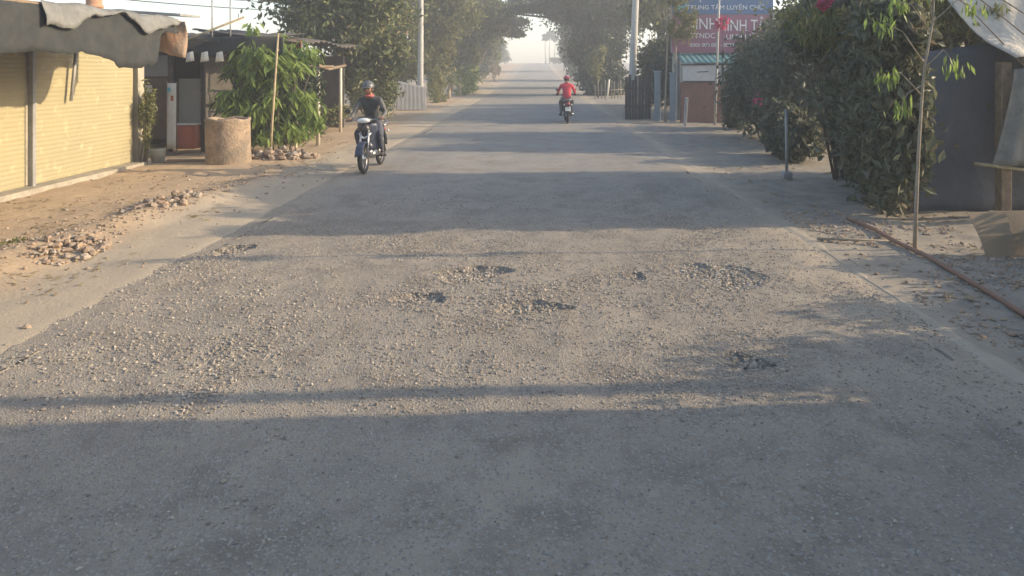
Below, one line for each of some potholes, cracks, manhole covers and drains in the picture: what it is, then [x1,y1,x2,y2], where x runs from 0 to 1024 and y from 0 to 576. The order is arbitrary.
pothole [623,271,647,281]
pothole [385,292,450,304]
pothole [491,299,580,315]
pothole [663,262,774,294]
pothole [721,350,781,372]
pothole [431,265,520,285]
